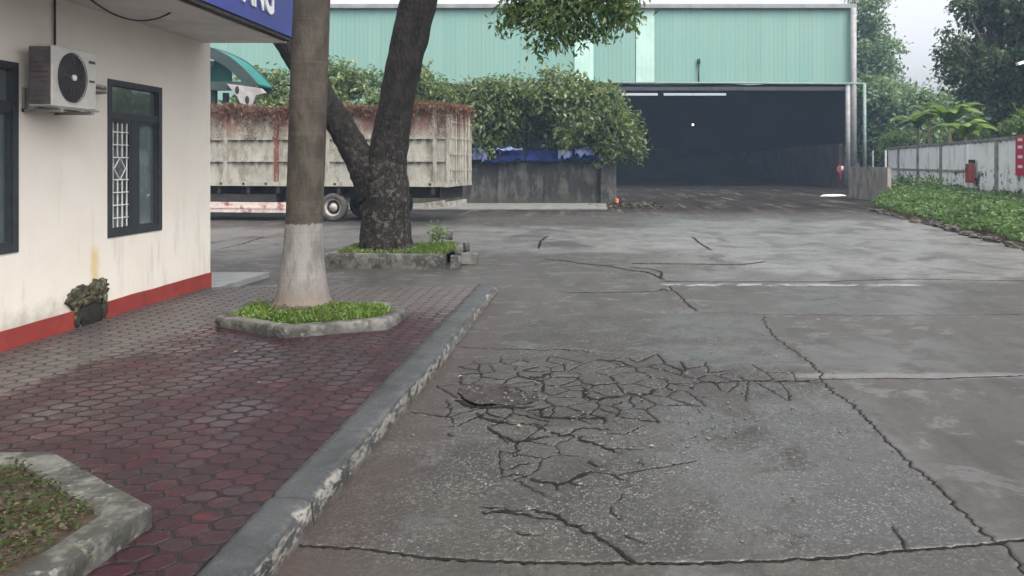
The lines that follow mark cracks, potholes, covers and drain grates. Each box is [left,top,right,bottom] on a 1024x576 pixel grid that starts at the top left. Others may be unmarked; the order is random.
crack [538,236,767,311]
crack [414,317,1024,574]
pothole [457,383,539,406]
